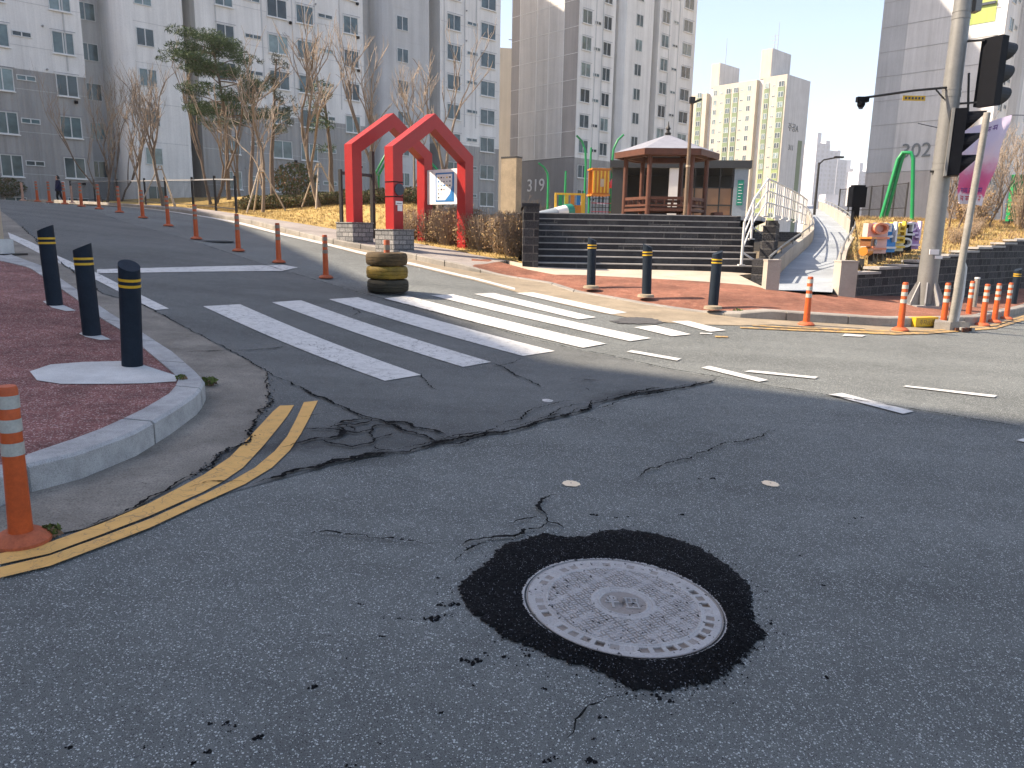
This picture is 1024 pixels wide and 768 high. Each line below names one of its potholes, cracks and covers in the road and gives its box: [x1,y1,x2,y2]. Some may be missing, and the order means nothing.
crack [638,430,773,477]
manhole cover [522,558,727,660]
crack [567,686,632,738]
crack [256,372,713,483]
crack [306,494,563,561]
